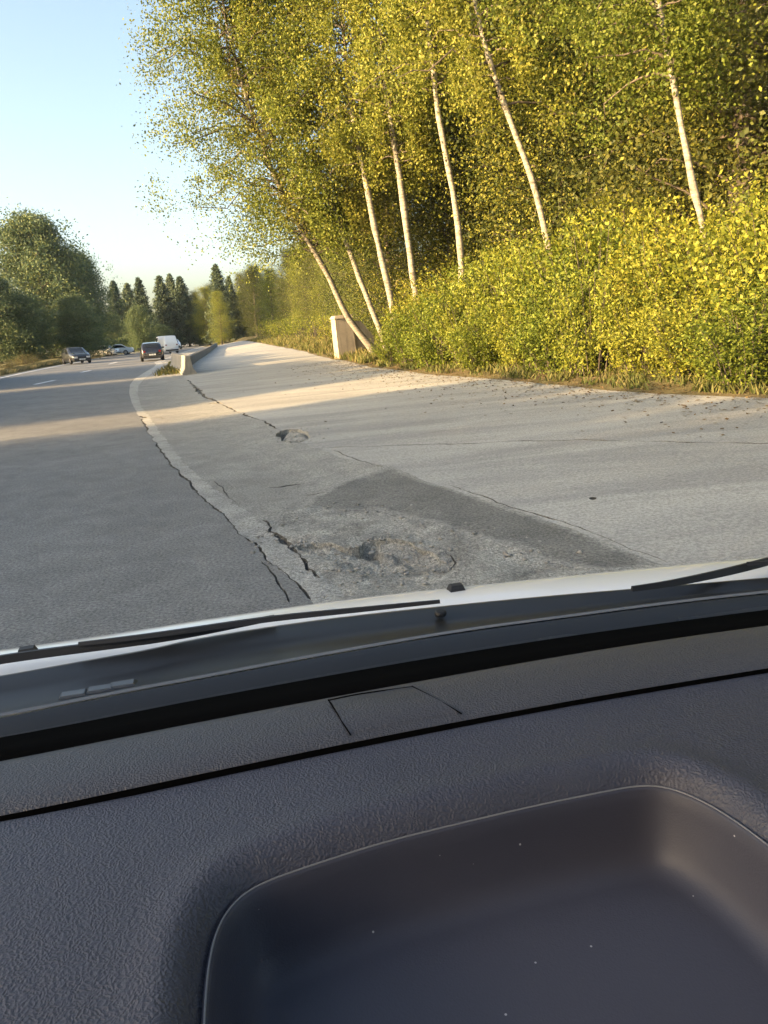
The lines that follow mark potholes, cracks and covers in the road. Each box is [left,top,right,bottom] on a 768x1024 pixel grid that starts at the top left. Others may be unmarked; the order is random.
crack [187,380,277,429]
pothole [296,538,441,578]
pothole [276,429,310,443]
crack [140,416,320,603]
